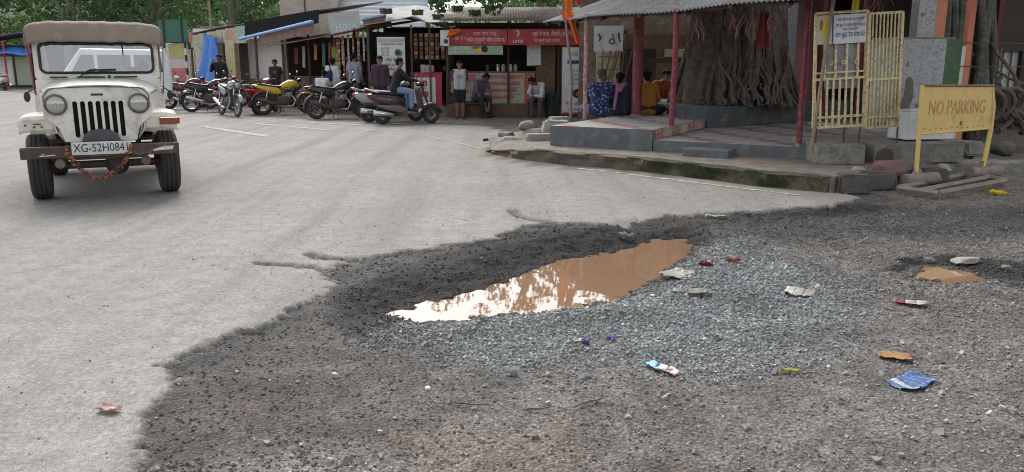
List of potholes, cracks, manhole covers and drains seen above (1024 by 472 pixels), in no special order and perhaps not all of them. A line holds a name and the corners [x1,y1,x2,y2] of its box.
pothole [883,256,1021,289]
pothole [319,219,743,333]
